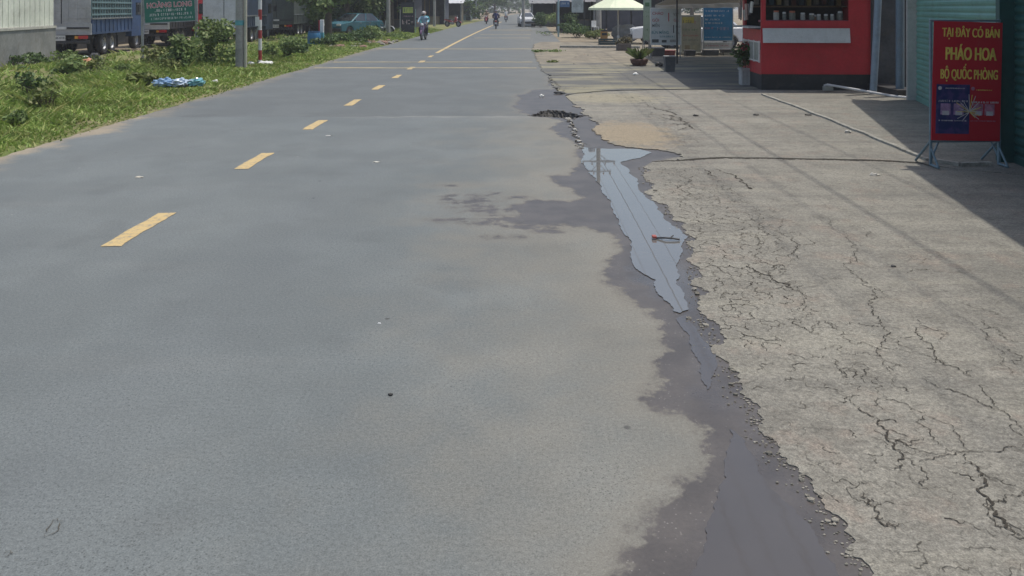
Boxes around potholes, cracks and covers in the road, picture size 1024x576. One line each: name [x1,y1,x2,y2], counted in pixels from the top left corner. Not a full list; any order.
crack [548,70,705,154]
crack [662,166,1024,576]
pothole [528,109,586,120]
